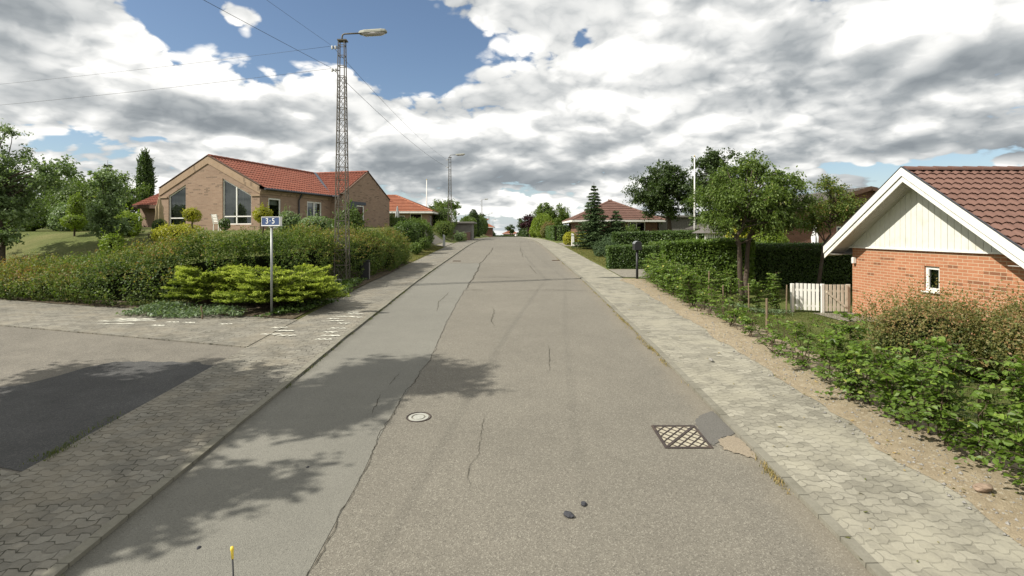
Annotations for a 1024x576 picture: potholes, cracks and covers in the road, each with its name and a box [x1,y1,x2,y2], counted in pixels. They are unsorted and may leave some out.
utility cover [406,412,431,422]
